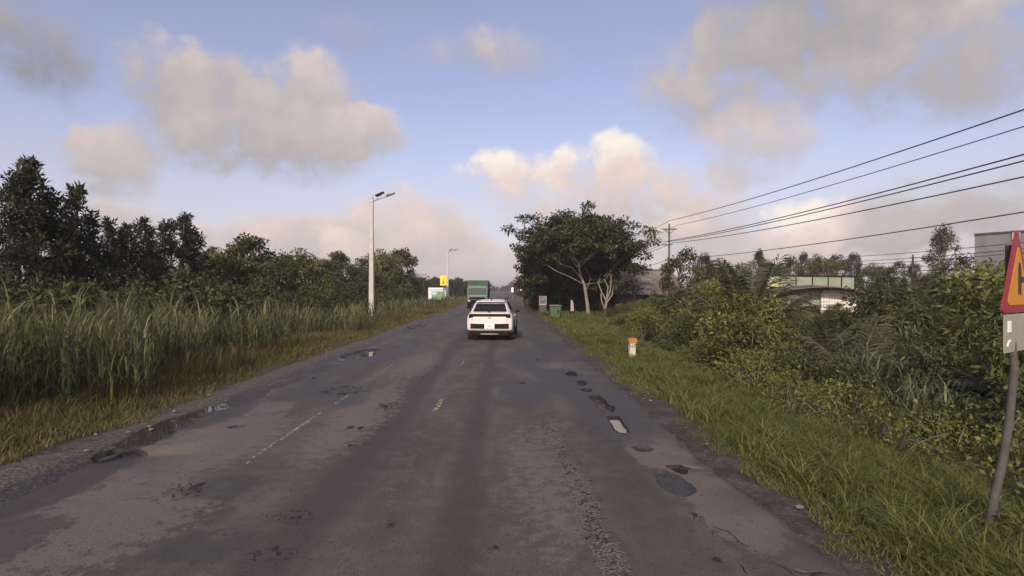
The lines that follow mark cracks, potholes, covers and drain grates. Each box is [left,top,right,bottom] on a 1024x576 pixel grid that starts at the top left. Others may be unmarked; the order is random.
crack [686,512,813,576]
crack [542,418,629,576]
pothole [665,464,691,475]
pothole [653,469,697,497]
pothole [606,416,630,434]
pothole [90,449,148,463]
pothole [587,395,615,414]
pothole [339,348,380,359]
